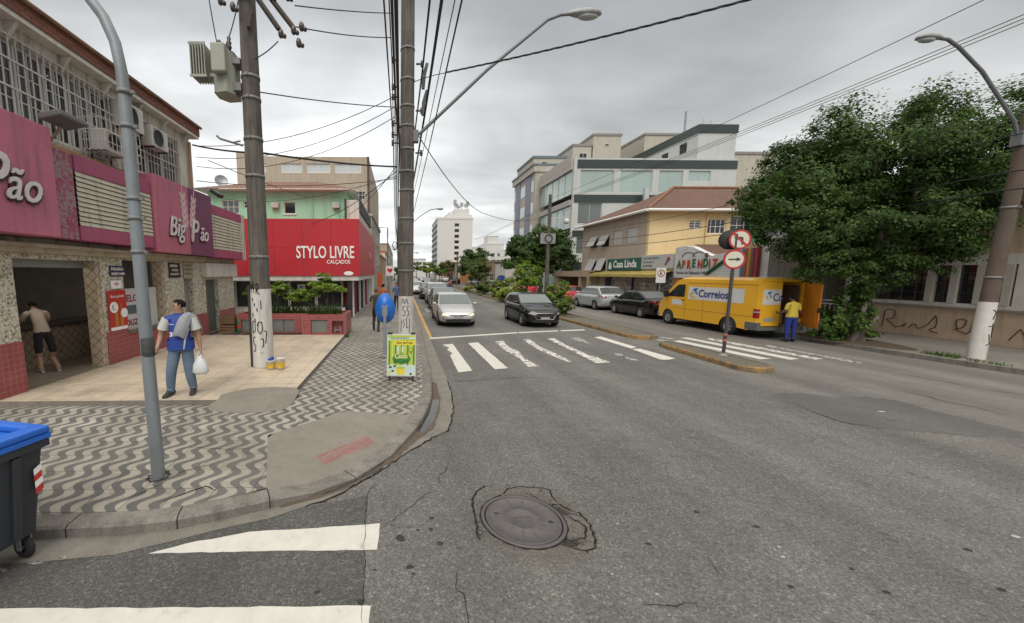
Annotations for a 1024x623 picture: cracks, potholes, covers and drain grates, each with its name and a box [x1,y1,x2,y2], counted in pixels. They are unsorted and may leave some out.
manhole cover [479,495,569,550]
crack [469,484,597,554]
